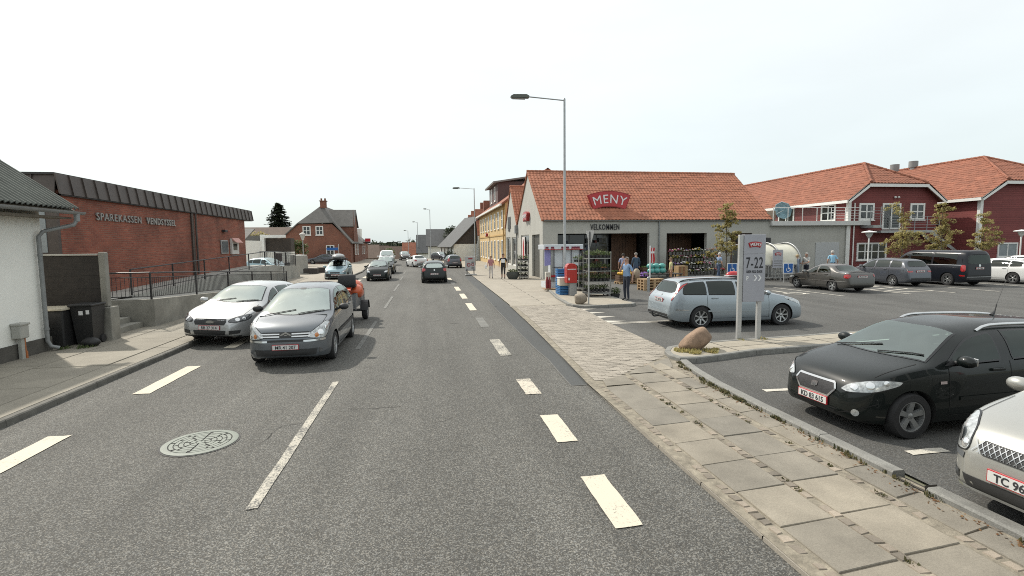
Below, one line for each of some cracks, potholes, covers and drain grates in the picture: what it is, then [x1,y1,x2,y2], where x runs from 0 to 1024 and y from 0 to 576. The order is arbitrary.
manhole cover [157,429,241,457]
